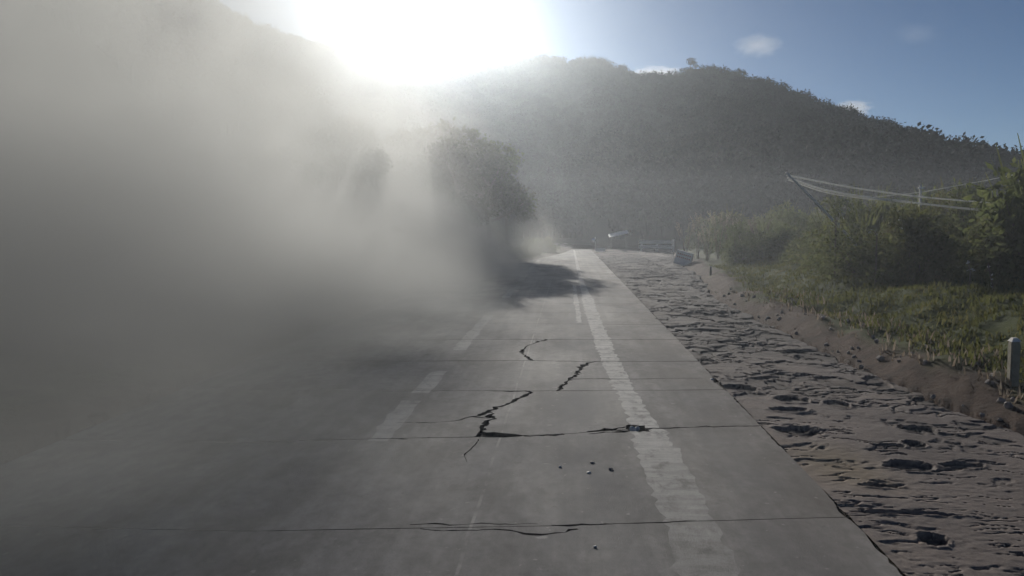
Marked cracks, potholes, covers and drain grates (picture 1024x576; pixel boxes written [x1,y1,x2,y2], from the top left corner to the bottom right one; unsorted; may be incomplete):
crack [519,340,545,361]
crack [399,390,565,461]
crack [410,520,692,536]
